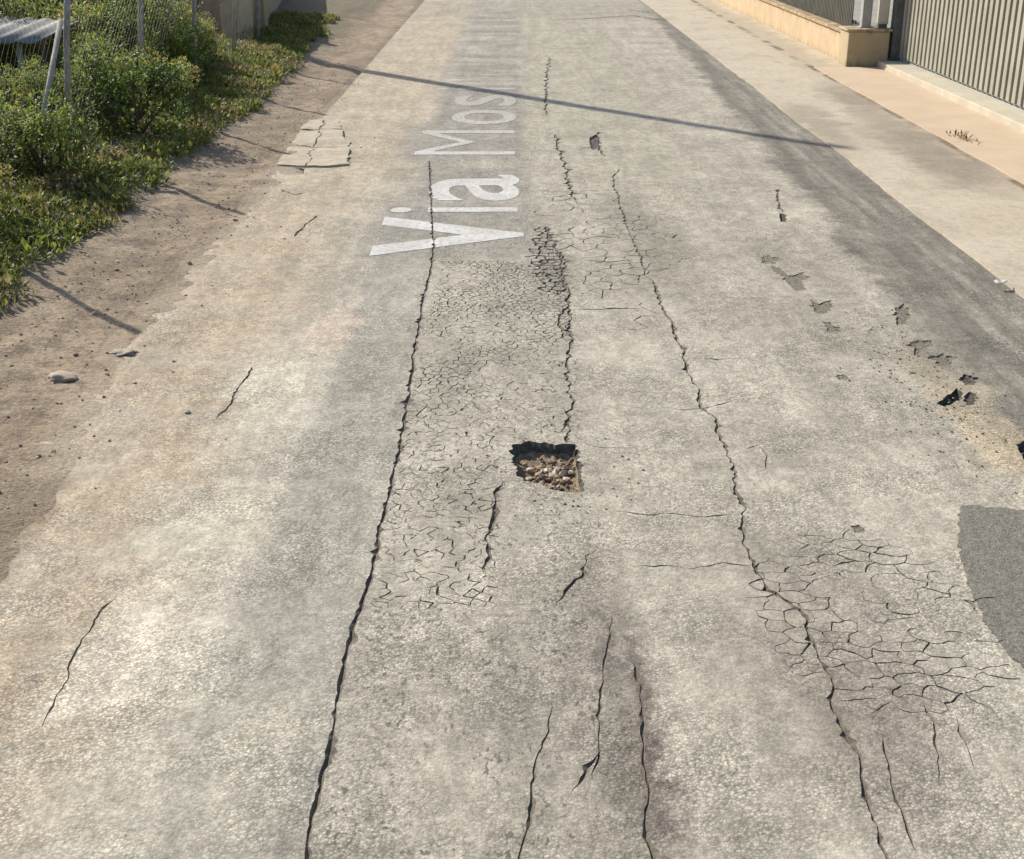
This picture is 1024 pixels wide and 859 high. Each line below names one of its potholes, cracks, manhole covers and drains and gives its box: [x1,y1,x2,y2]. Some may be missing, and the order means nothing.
pothole [907,340,933,356]
pothole [822,322,841,333]
crack [216,367,254,419]
crack [542,57,552,114]
pothole [927,353,957,368]
pothole [810,299,834,315]
crack [524,132,1021,859]
pothole [892,303,911,325]
crack [518,702,553,859]
pothole [937,388,963,406]
pothole [761,255,783,264]
crack [41,595,121,732]
